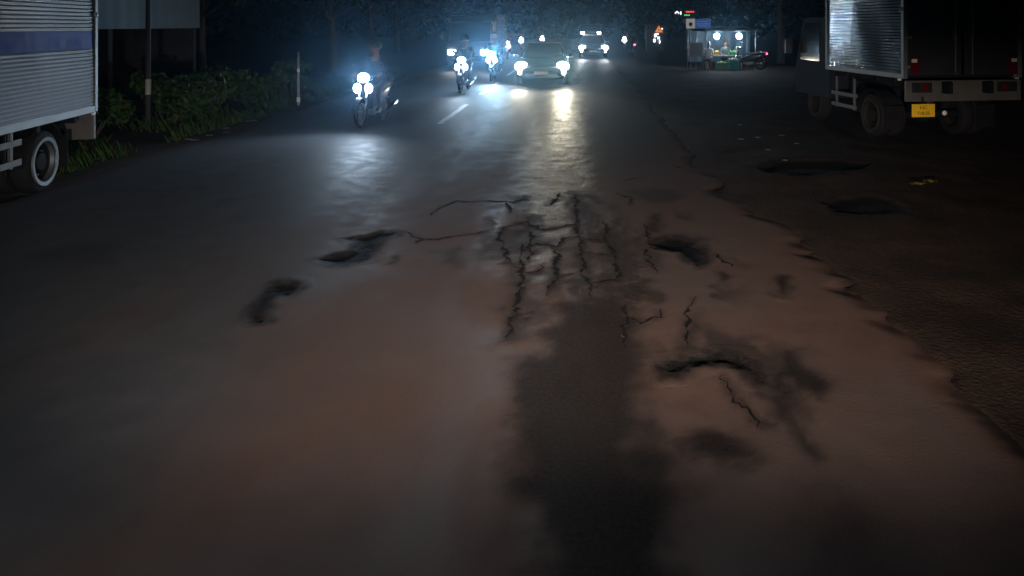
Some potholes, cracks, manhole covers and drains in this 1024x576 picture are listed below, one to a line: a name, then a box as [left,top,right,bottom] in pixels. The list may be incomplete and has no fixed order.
pothole [808,190,927,218]
pothole [747,156,883,179]
pothole [304,228,412,270]
pothole [230,275,319,330]
pothole [640,233,721,272]
crack [719,376,761,427]
crack [408,178,663,347]
crack [682,297,696,345]
